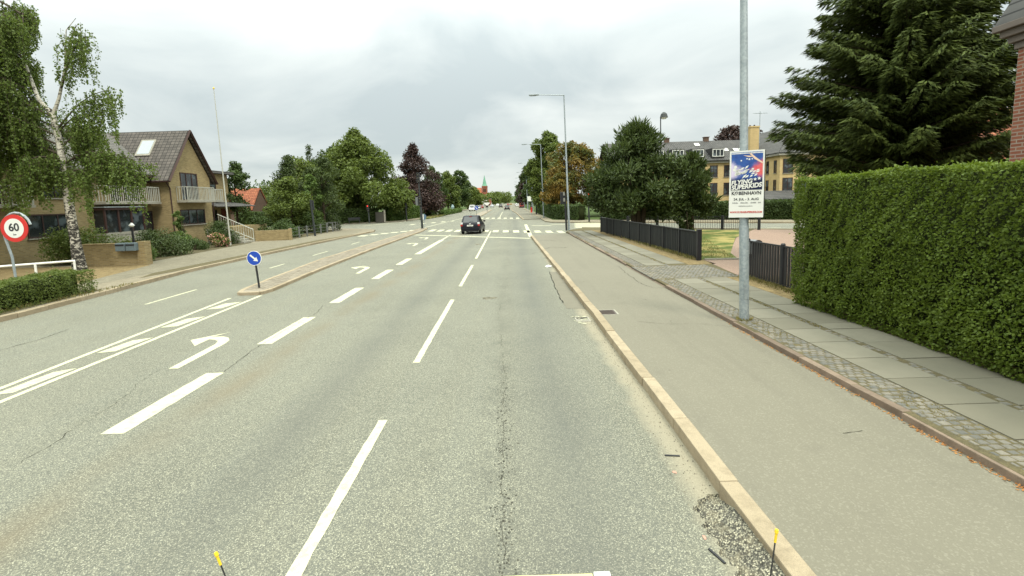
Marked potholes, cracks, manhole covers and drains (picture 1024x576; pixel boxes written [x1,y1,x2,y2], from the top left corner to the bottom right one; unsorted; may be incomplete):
pothole [692,494,785,576]
crack [490,294,519,576]
